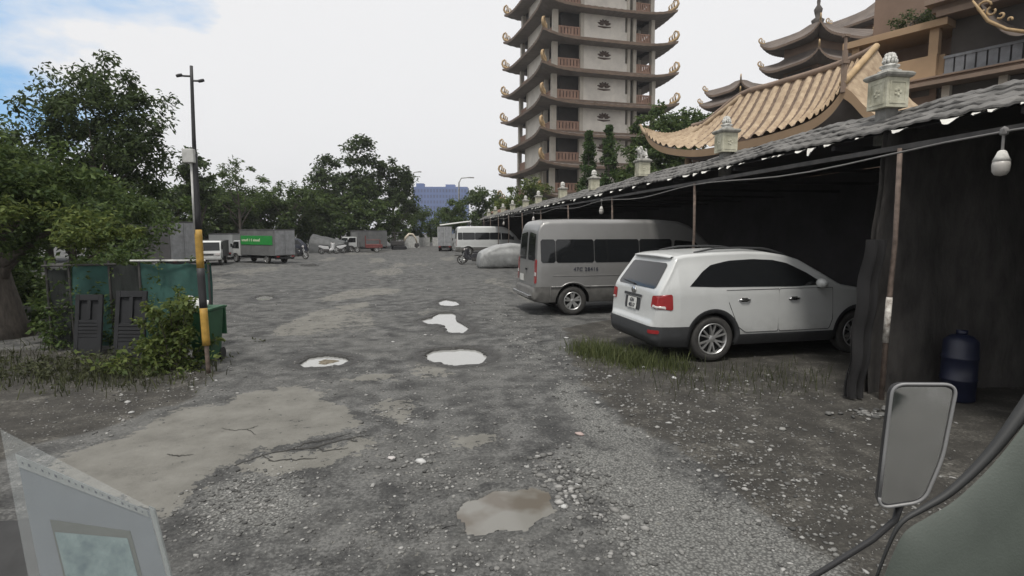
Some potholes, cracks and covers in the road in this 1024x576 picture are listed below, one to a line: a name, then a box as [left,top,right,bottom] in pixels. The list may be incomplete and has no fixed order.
crack [234,432,366,466]
pothole [432,298,466,307]
pothole [286,353,360,370]
pothole [431,479,575,552]
pothole [412,311,476,335]
pothole [414,345,500,368]
